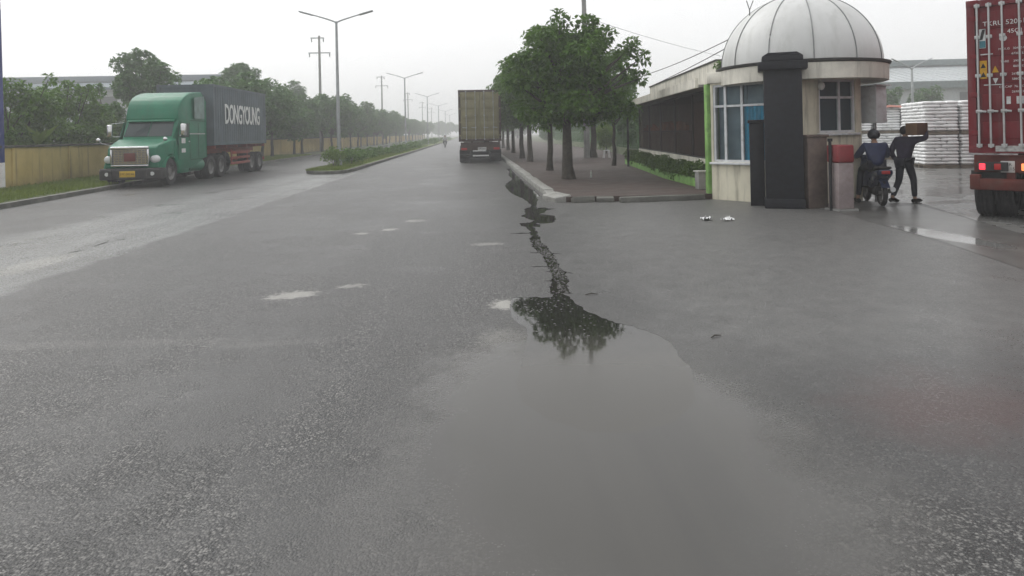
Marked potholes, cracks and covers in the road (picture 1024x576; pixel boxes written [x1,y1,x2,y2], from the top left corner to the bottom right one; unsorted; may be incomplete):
crack [512,232,572,295]
